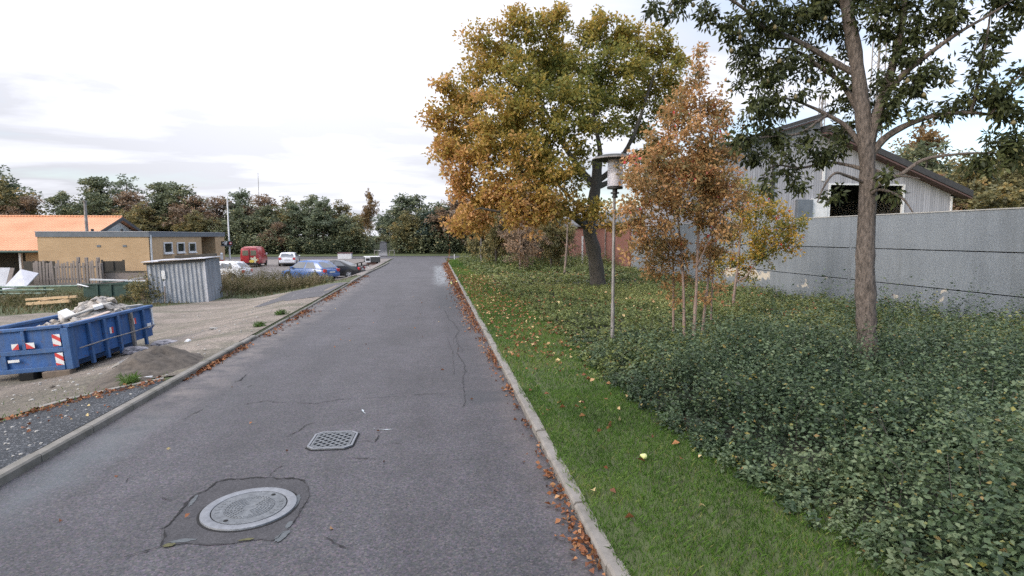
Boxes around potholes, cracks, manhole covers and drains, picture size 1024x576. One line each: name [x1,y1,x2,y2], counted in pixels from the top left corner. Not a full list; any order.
drain grate [305,431,360,451]
crack [446,313,467,405]
manhole cover [196,487,299,532]
